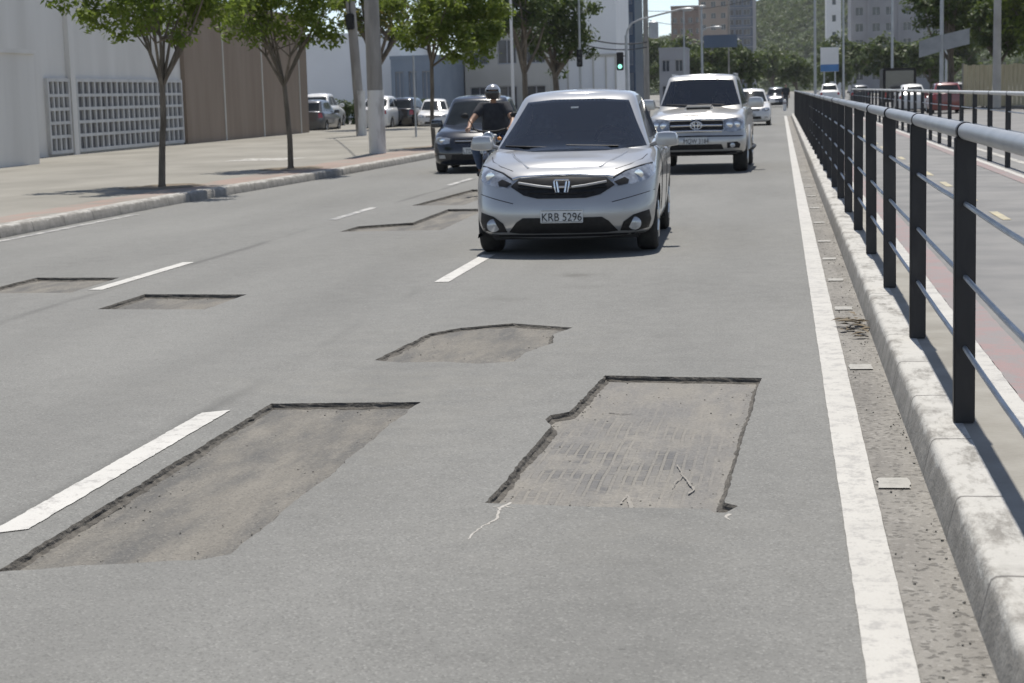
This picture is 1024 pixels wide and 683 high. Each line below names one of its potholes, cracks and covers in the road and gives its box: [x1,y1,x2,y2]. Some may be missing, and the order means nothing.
crack [672,464,695,493]
pothole [0,402,420,572]
pothole [485,375,762,513]
pothole [412,190,478,206]
pothole [100,294,247,309]
crack [468,502,513,539]
pothole [340,209,478,232]
pothole [0,278,117,293]
pothole [376,323,572,364]
